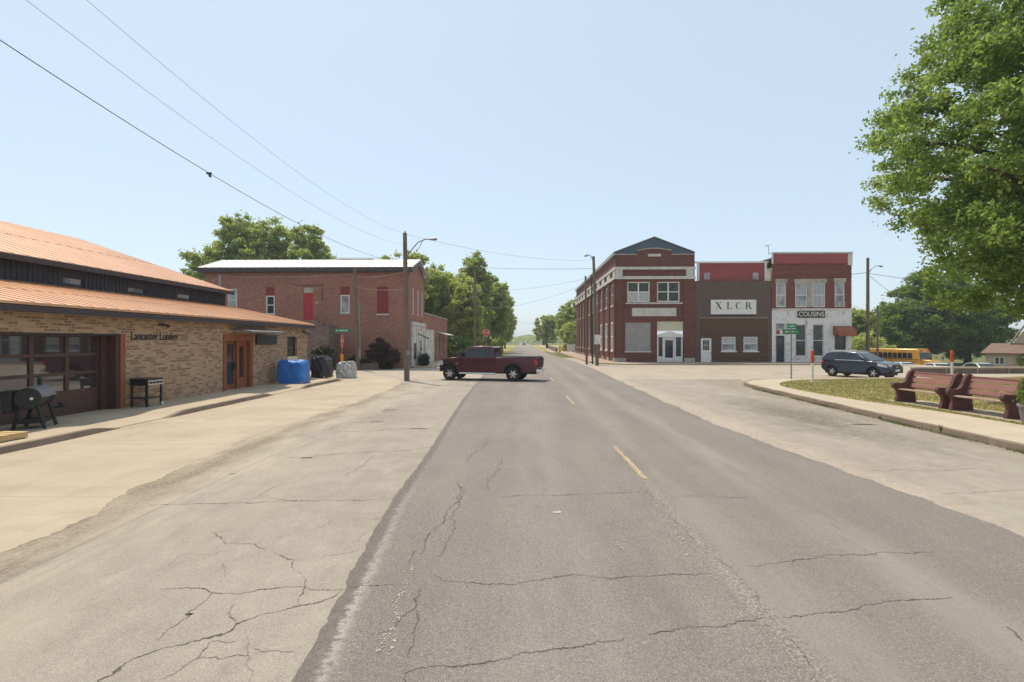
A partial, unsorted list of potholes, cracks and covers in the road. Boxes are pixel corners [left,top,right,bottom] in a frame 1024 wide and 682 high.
crack [434,573,711,585]
crack [755,551,933,567]
crack [786,597,951,618]
crack [408,443,487,564]
crack [517,489,820,674]
crack [381,589,623,682]
crack [97,485,392,682]
